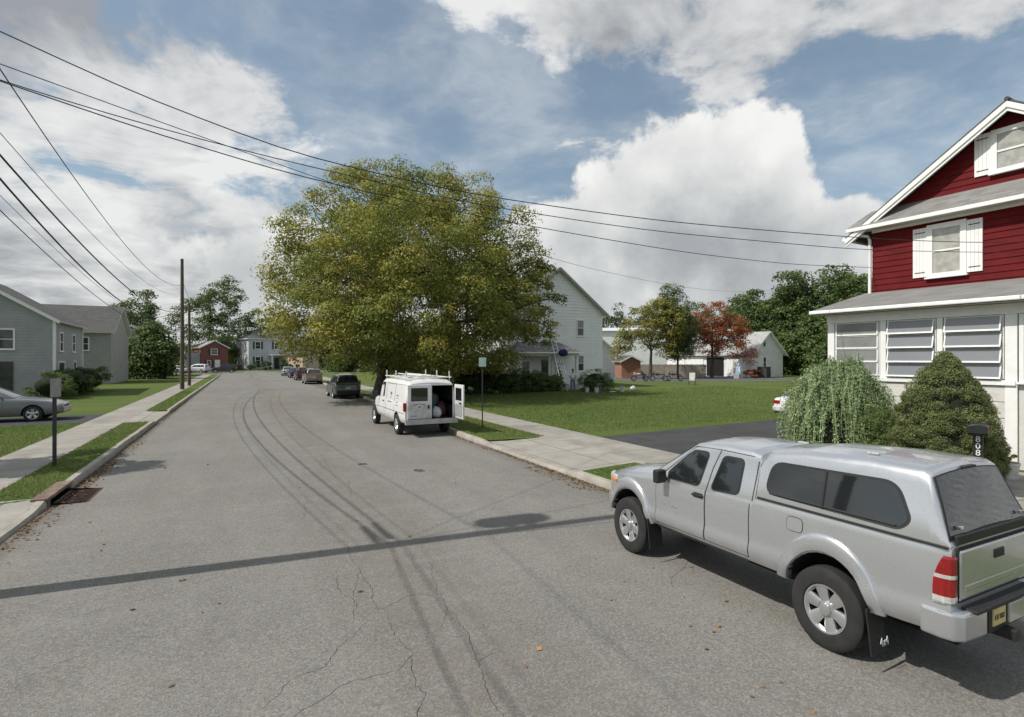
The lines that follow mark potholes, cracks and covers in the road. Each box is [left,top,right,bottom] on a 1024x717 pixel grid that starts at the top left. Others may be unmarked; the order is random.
crack [294,547,504,717]
crack [258,627,361,711]
drain grate [30,480,103,508]
